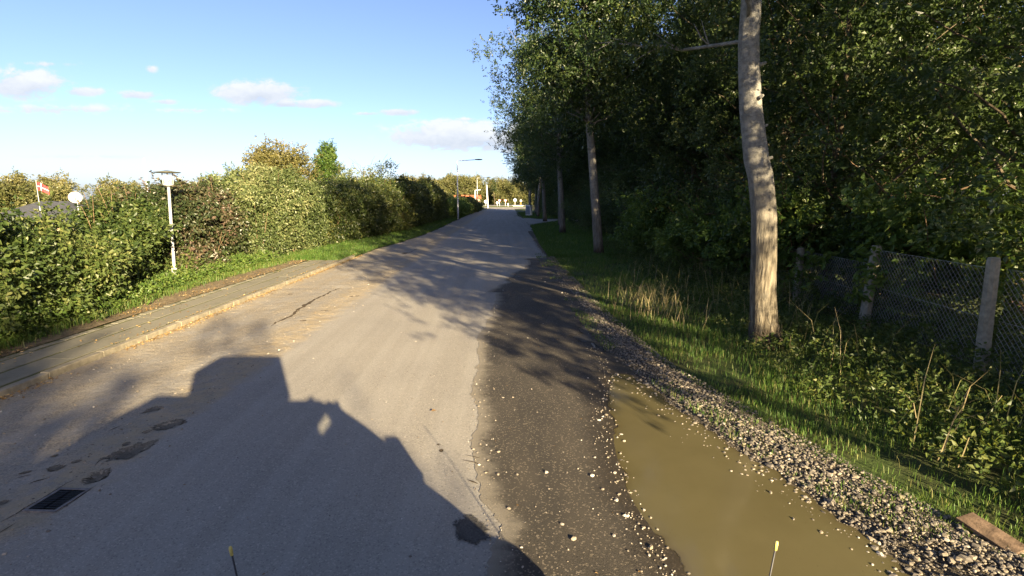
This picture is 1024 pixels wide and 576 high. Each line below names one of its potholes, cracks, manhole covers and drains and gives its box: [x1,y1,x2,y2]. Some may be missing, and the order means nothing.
pothole [82,468,113,484]
pothole [100,439,158,462]
drain grate [22,487,91,513]
pothole [151,419,187,430]
crack [271,289,336,326]
